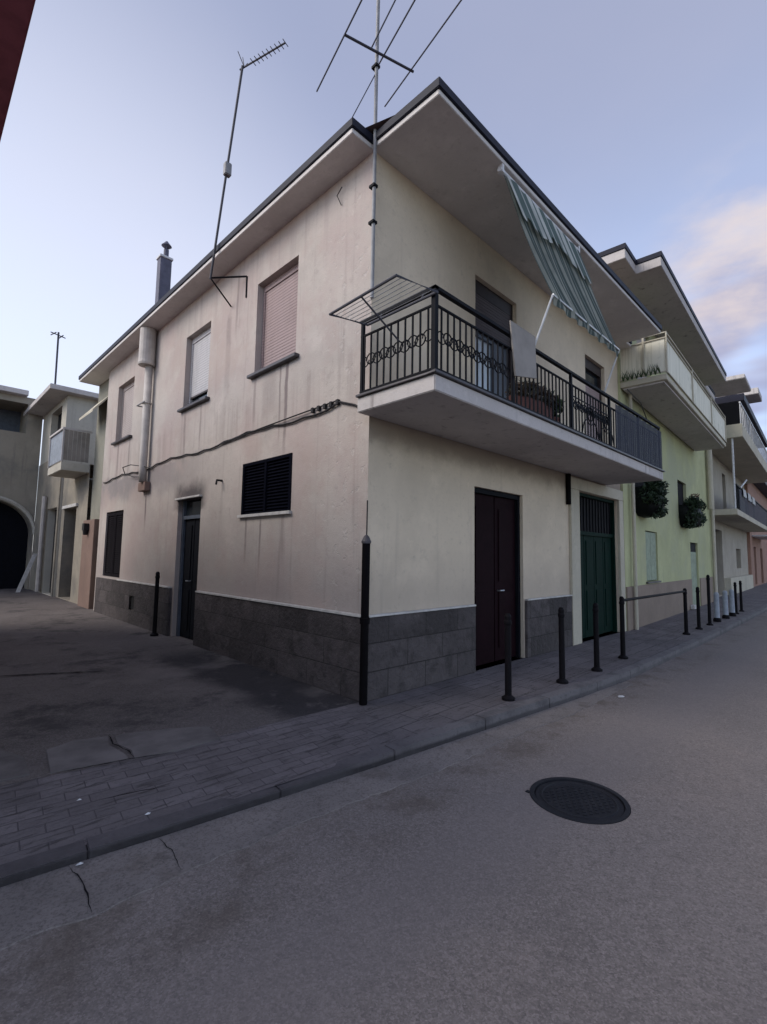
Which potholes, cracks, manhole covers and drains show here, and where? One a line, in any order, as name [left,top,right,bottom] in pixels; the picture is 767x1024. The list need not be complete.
crack [58,736,171,773]
crack [71,869,92,912]
manhole cover [525,777,631,825]
